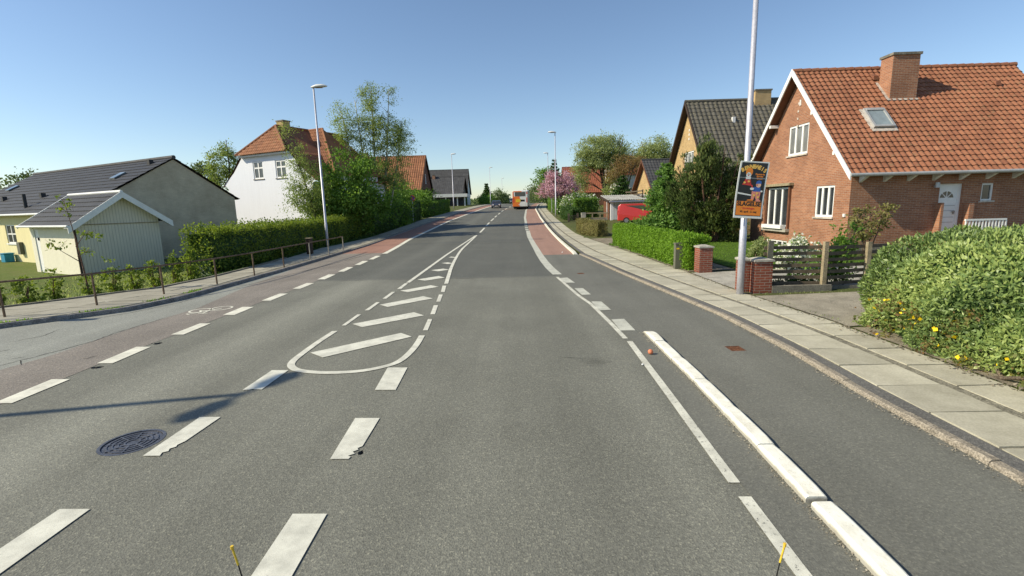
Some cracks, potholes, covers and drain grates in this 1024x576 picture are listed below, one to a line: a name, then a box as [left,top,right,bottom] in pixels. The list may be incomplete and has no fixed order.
manhole cover [96,429,167,456]
